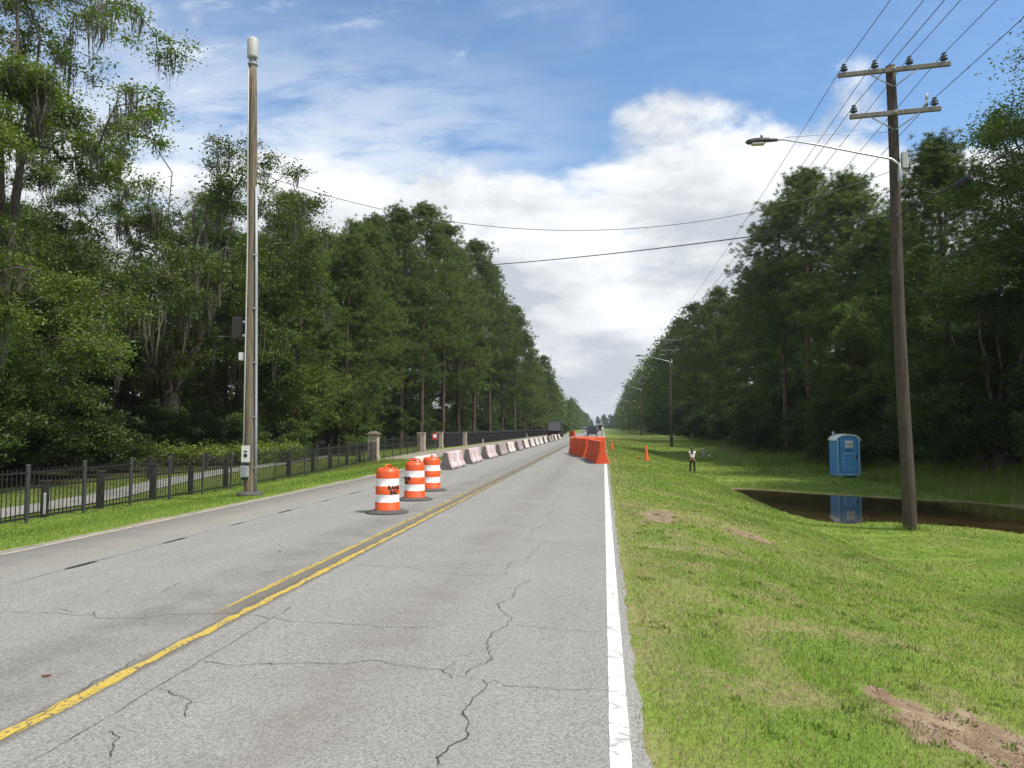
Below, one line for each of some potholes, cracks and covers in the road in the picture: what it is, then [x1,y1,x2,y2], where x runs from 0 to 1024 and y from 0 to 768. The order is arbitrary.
crack [203,580,616,766]
crack [3,609,580,631]
